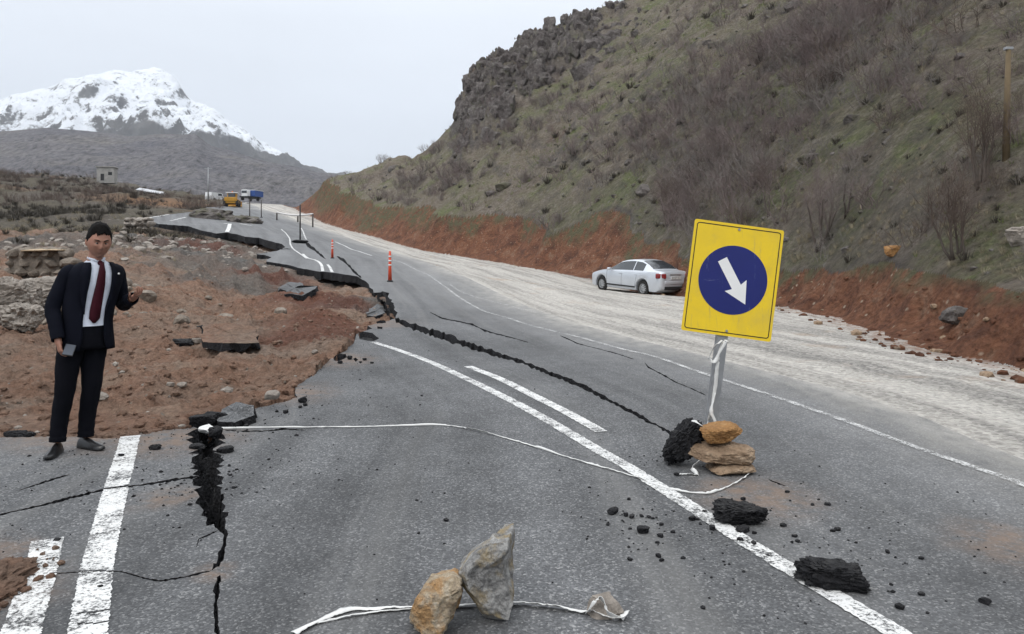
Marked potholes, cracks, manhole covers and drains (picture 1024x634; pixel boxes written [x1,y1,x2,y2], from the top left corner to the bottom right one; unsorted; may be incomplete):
crack [306,243,705,434]
crack [0,423,298,634]
